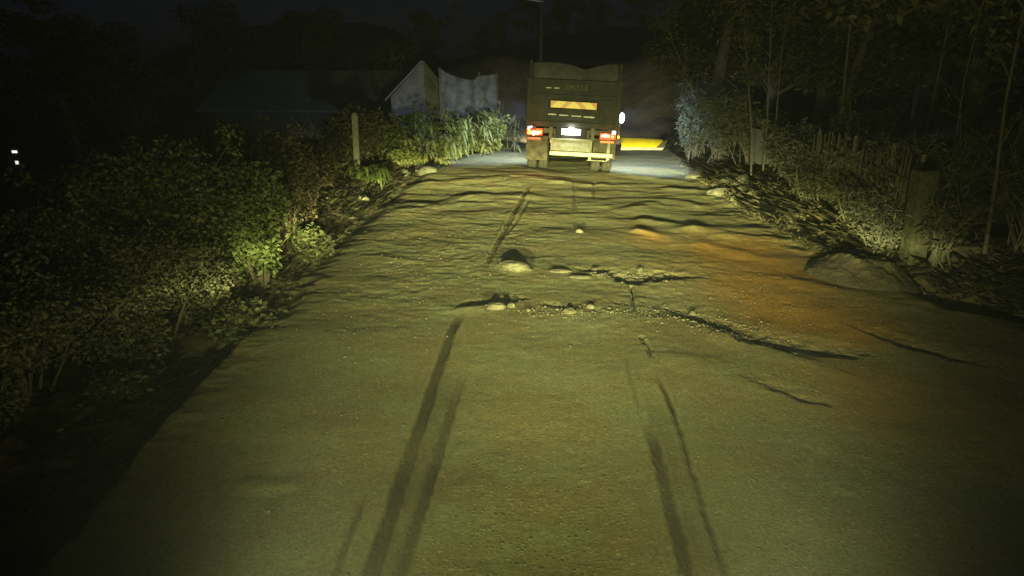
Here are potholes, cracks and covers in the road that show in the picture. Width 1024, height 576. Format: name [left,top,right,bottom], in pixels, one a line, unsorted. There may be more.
pothole [448,294,536,309]
